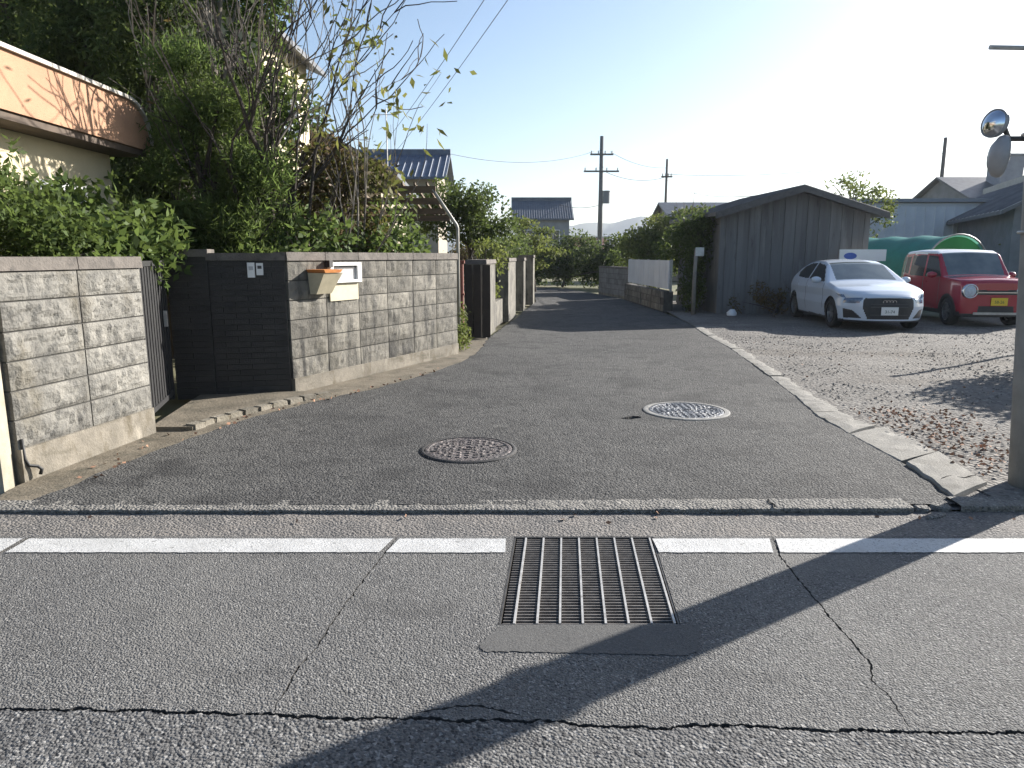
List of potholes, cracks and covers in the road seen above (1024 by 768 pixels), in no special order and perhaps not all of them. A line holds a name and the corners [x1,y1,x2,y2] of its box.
crack [0,537,1024,735]
drain grate [498,537,681,625]
manhole cover [643,402,731,421]
manhole cover [420,437,517,464]
